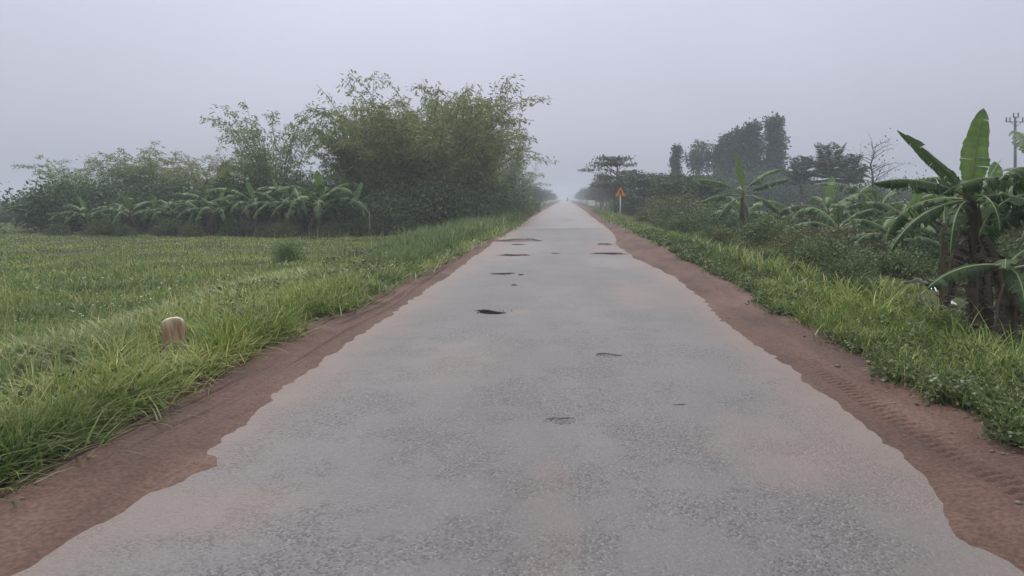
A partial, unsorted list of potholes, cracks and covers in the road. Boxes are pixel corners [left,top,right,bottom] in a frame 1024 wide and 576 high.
pothole [543,417,575,425]
